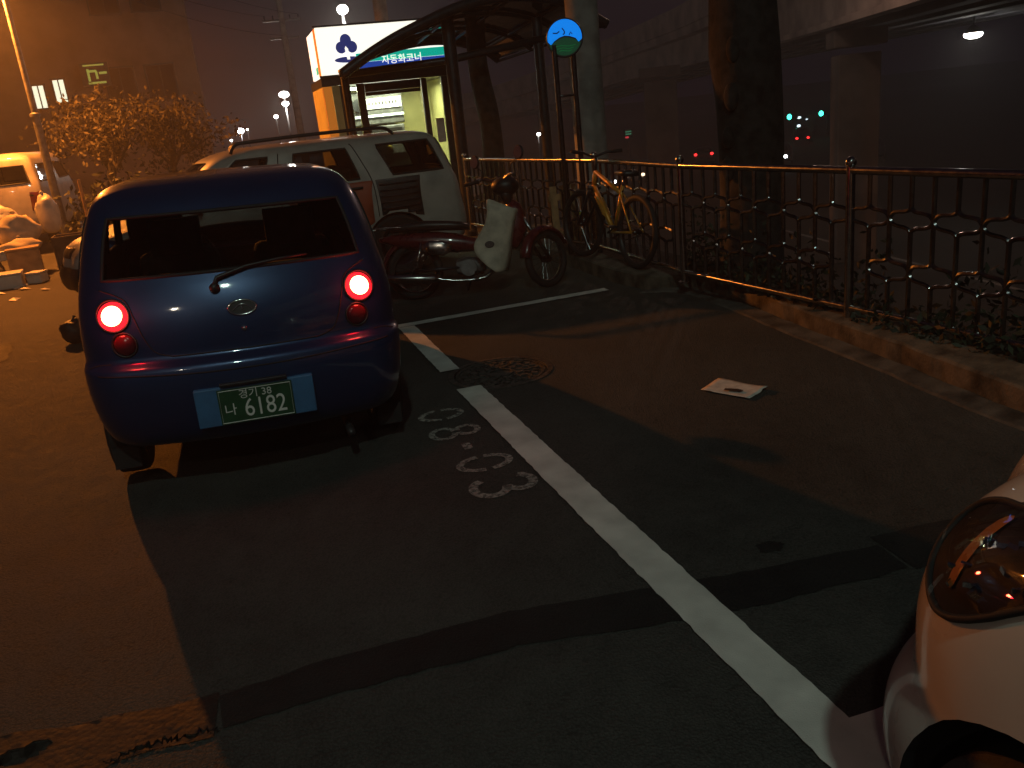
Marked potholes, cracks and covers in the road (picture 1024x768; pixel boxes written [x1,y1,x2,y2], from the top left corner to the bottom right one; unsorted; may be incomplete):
manhole cover [448,356,553,390]
pothole [0,738,53,766]
